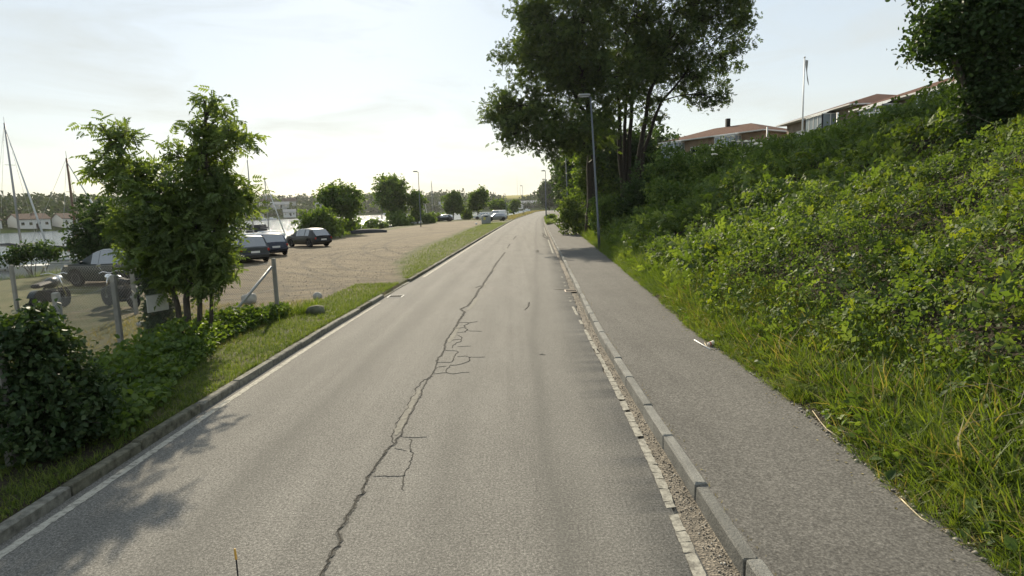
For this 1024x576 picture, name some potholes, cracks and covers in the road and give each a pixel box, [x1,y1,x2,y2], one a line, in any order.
crack [317,236,516,576]
